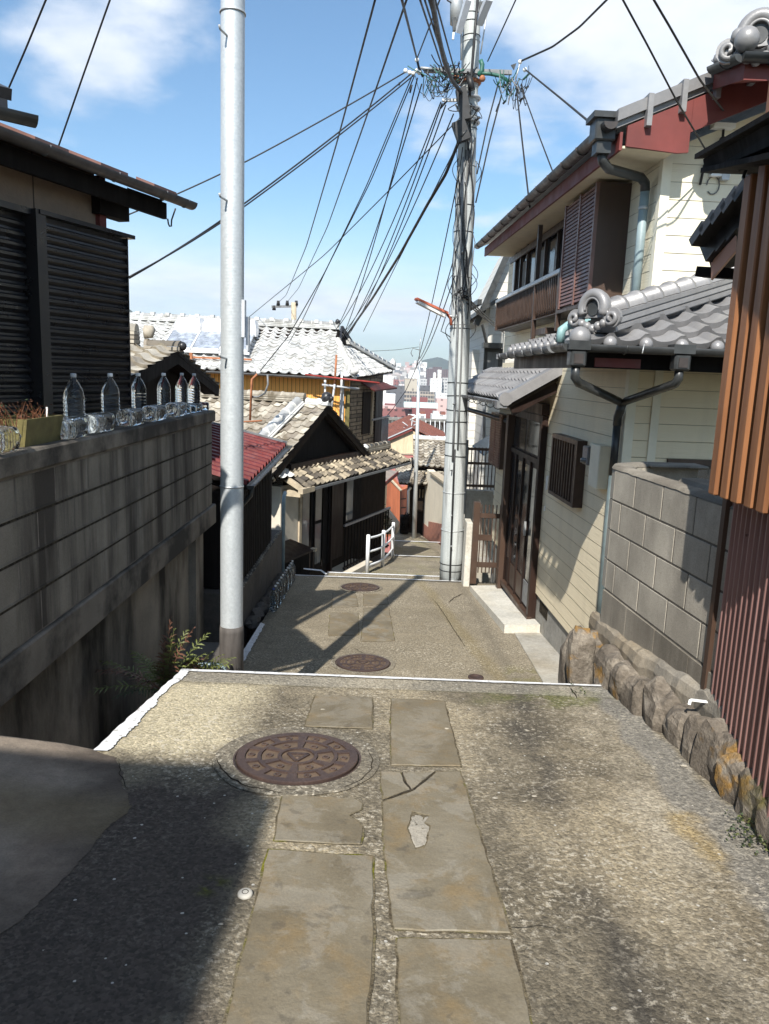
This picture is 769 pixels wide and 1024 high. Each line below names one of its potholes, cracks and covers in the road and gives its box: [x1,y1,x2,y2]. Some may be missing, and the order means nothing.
manhole cover [338,582,383,592]
manhole cover [213,727,380,796]
pothole [408,815,429,847]
manhole cover [330,653,396,674]
crack [345,749,435,800]
